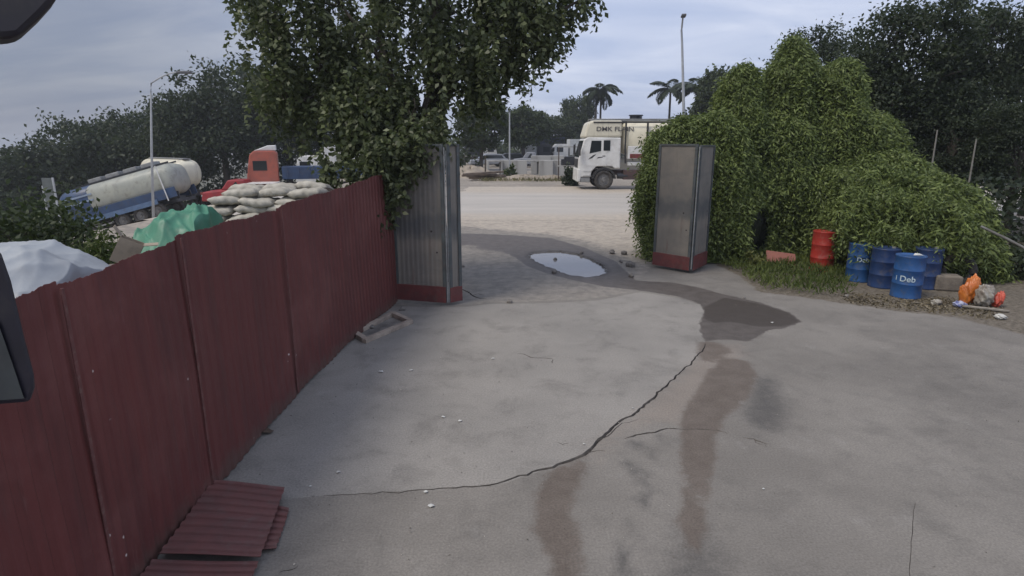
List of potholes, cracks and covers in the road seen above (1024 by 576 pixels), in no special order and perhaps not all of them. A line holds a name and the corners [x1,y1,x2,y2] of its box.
crack [325,344,726,496]
